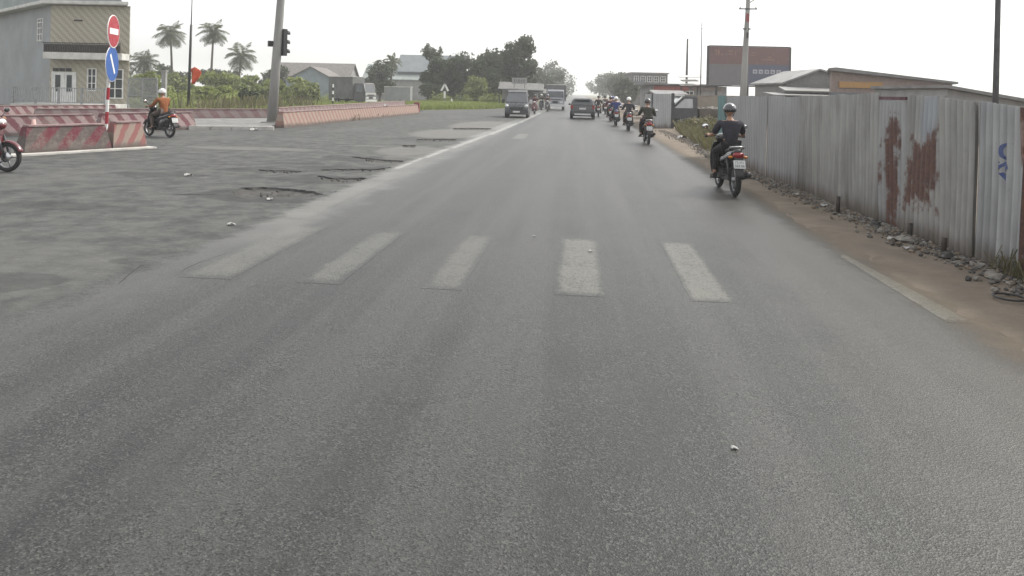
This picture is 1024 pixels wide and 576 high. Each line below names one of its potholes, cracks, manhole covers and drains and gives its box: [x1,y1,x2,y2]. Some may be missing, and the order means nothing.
pothole [231,187,323,198]
